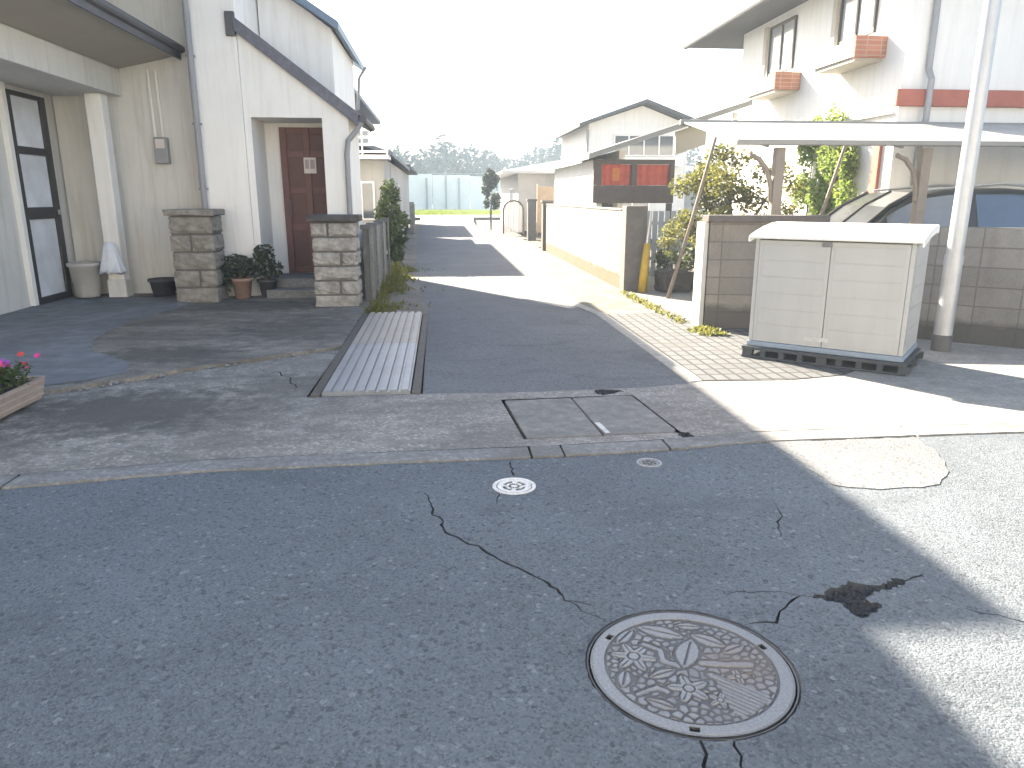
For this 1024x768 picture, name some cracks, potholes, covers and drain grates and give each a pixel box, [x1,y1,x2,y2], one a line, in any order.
crack [424,493,605,621]
manhole cover [585,610,802,746]
crack [700,740,709,768]
pothole [813,578,905,618]
crack [733,743,743,768]
crack [731,591,812,624]
manhole cover [636,458,662,467]
manhole cover [492,477,536,495]
